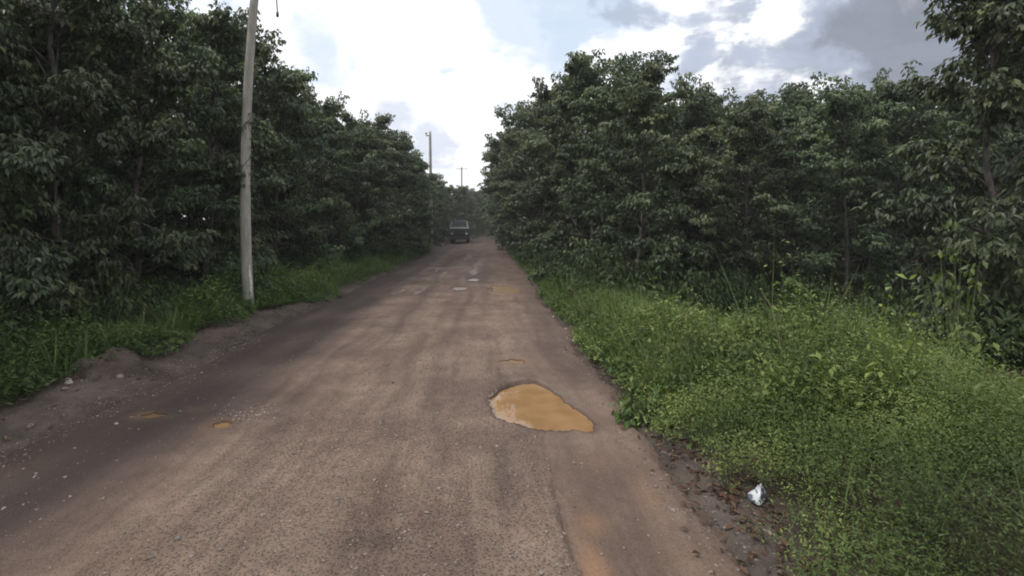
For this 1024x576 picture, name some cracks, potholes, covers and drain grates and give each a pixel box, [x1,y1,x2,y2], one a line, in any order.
pothole [483,285,523,296]
pothole [493,357,530,365]
pothole [133,410,173,420]
pothole [476,374,613,440]
pothole [207,419,238,431]
